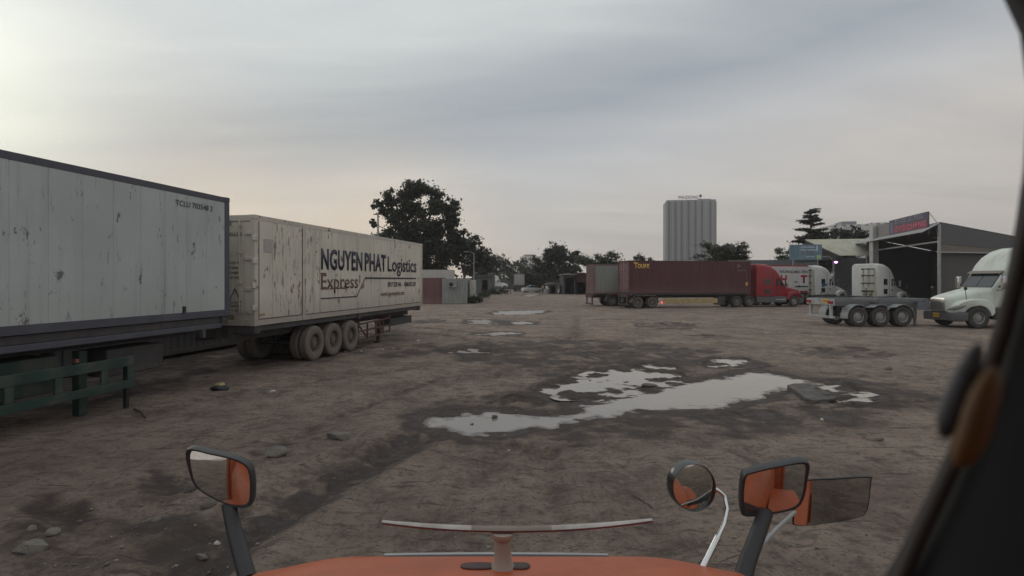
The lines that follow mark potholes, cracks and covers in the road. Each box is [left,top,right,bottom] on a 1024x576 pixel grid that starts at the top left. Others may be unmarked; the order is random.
pothole [701,356,752,368]
pothole [440,346,493,354]
pothole [412,369,832,439]
